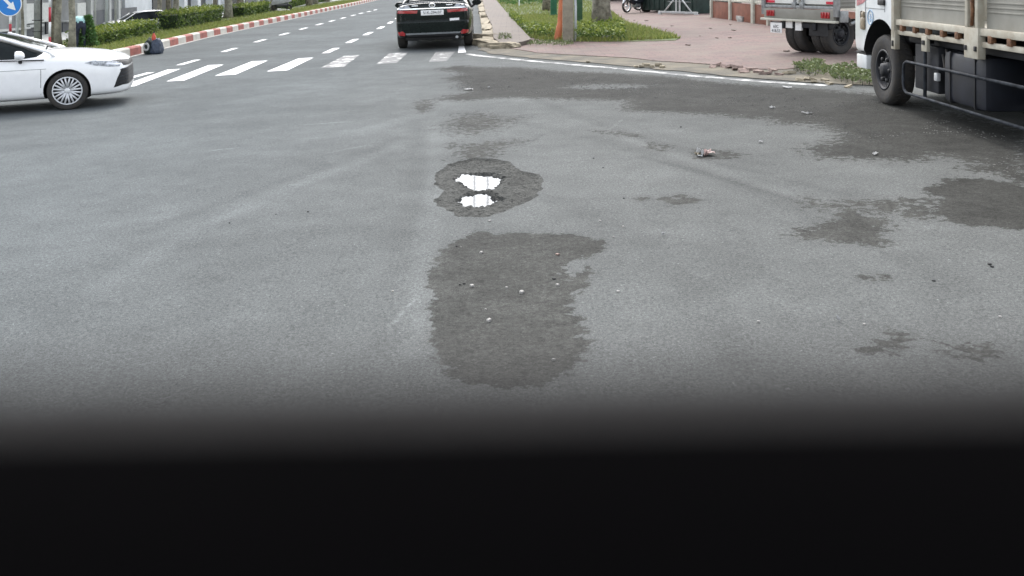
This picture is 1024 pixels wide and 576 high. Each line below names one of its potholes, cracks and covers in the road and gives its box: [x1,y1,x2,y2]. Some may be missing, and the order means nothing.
pothole [433,158,544,217]
